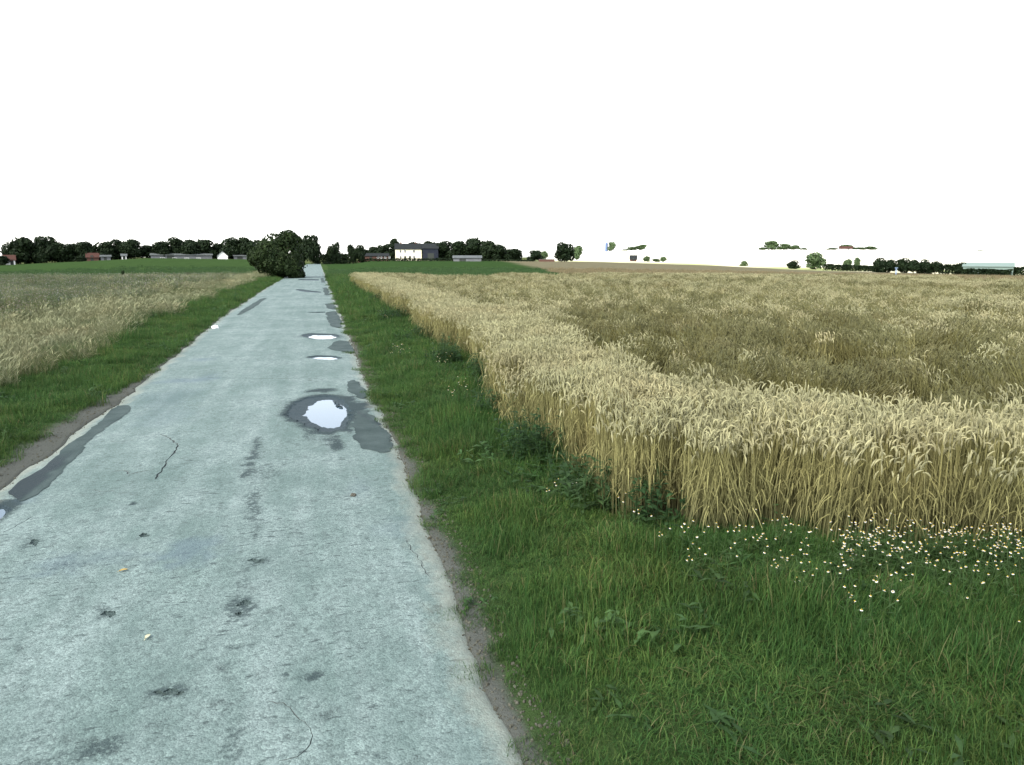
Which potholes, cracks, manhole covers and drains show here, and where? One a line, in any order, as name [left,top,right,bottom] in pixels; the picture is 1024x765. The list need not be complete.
pothole [283,395,354,432]
crack [268,701,313,761]
pothole [152,688,185,696]
crack [111,434,179,479]
